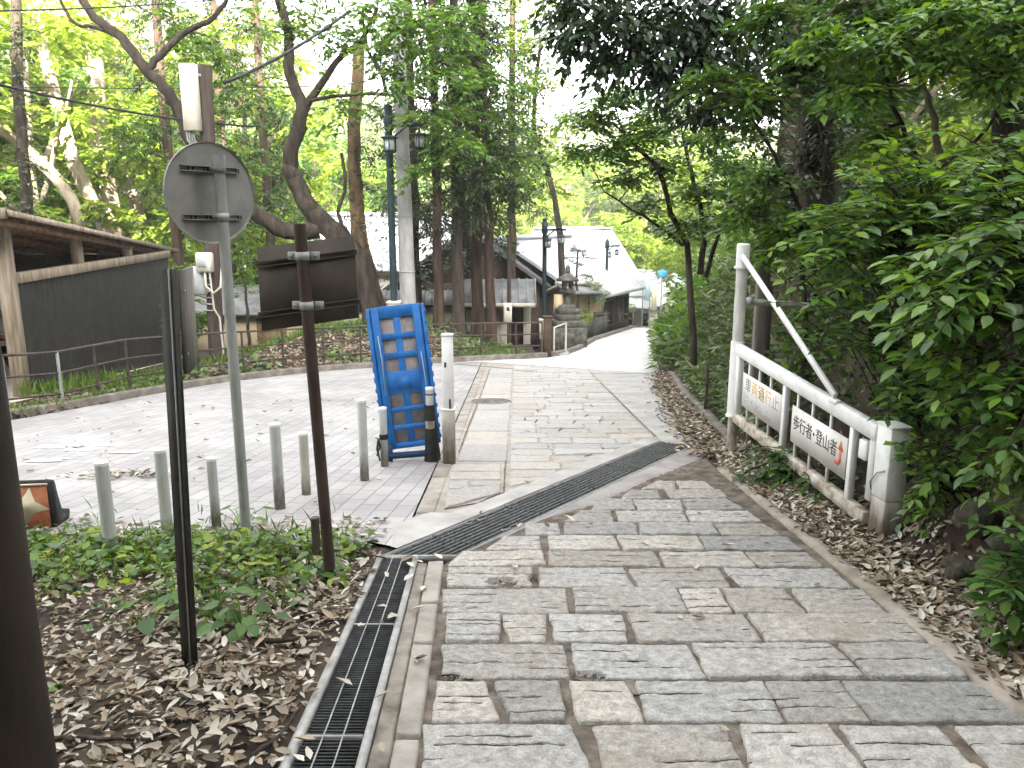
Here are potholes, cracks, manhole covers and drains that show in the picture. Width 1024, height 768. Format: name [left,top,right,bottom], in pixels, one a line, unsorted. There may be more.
drain grate [280,556,418,768]
drain grate [382,434,719,566]
